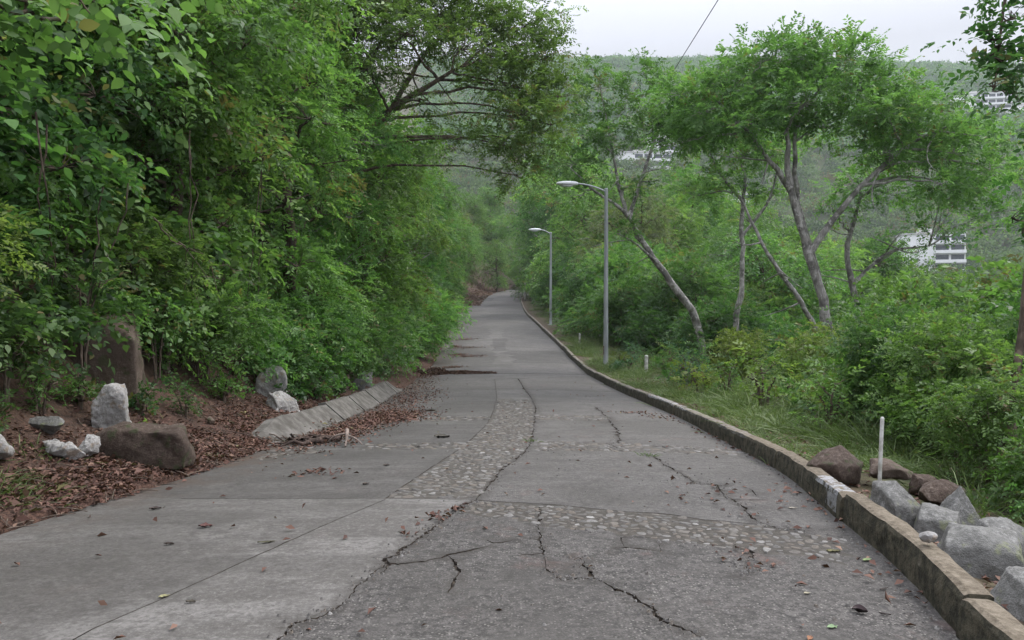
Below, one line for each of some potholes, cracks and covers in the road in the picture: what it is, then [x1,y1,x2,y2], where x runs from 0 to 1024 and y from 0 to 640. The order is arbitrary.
crack [277,500,701,640]
crack [476,379,537,500]
